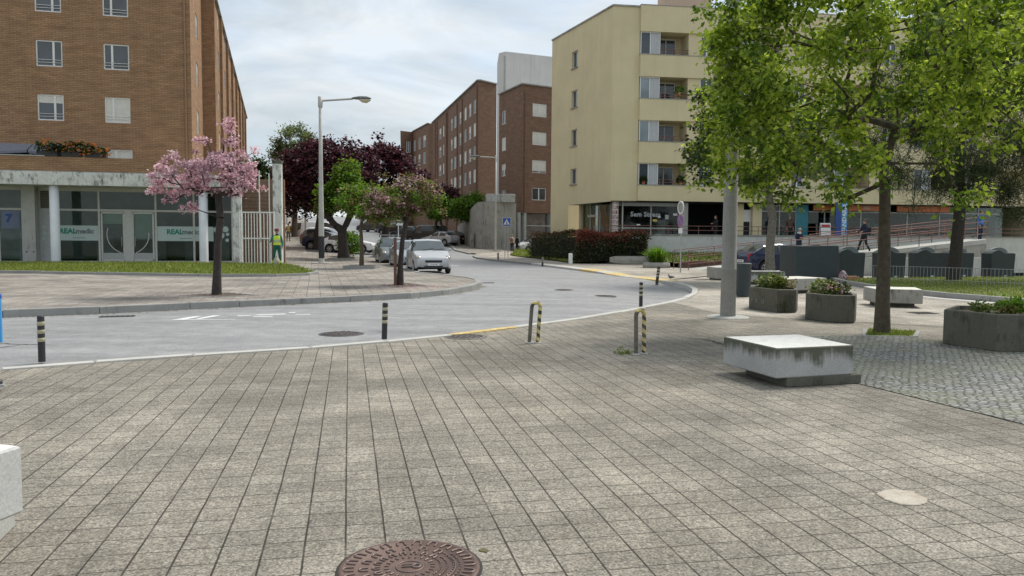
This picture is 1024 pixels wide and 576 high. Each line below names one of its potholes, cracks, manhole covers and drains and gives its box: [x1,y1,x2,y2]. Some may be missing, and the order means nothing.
manhole cover [335,540,483,576]
